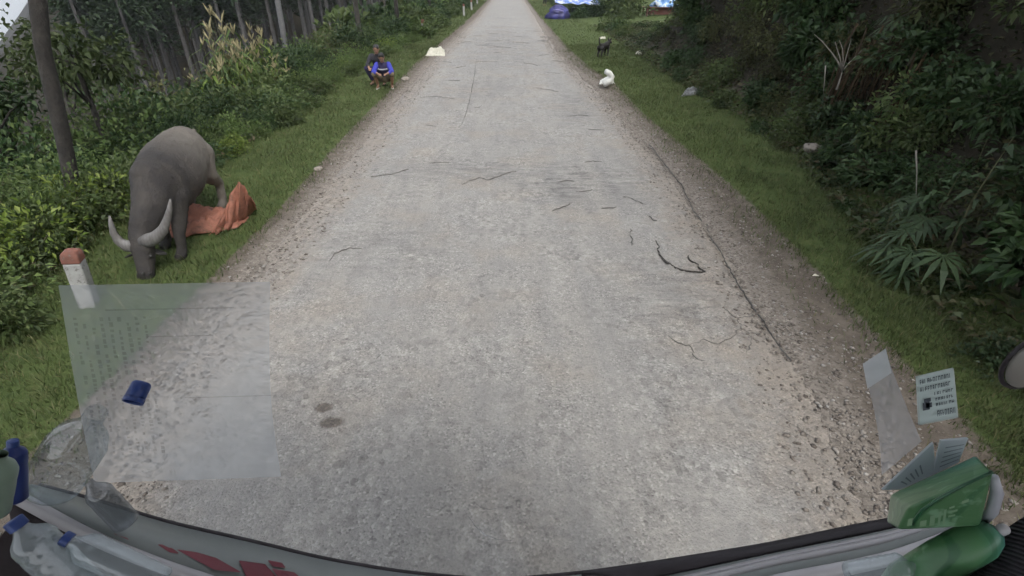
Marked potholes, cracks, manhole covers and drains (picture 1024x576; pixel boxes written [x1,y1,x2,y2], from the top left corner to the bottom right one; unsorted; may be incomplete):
crack [462,171,516,185]
crack [552,180,657,246]
crack [429,31,559,123]
crack [649,144,791,362]
